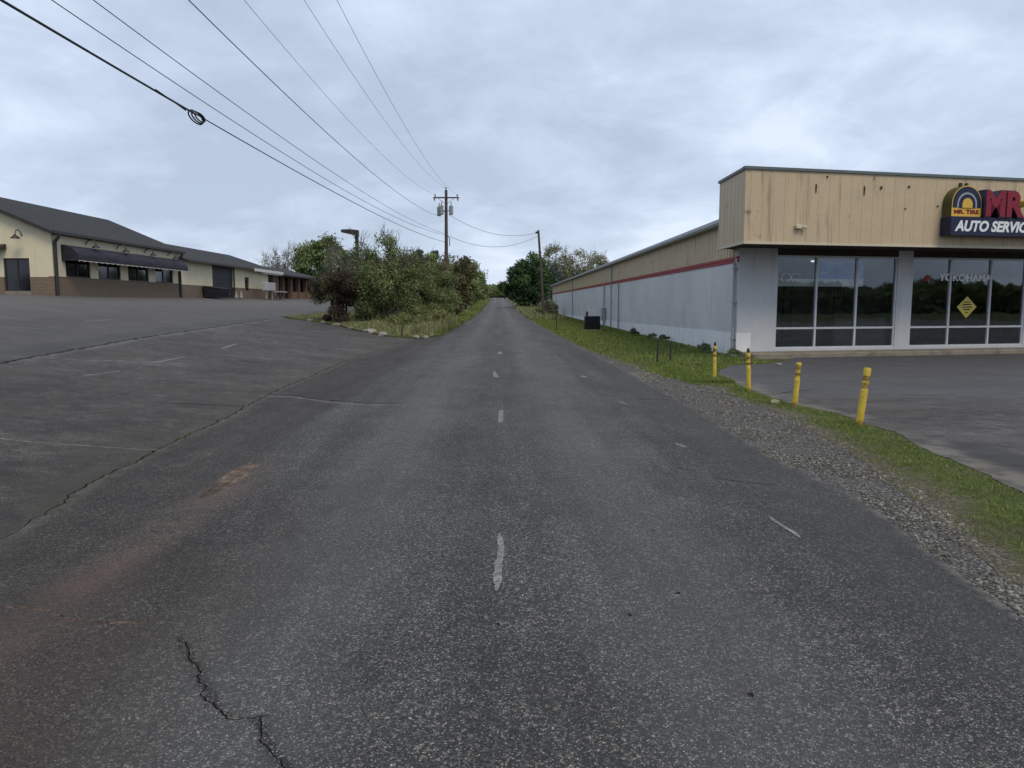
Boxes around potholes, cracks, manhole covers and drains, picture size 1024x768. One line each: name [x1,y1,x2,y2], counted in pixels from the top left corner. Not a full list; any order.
crack [5,606,149,624]
crack [178,638,285,768]
